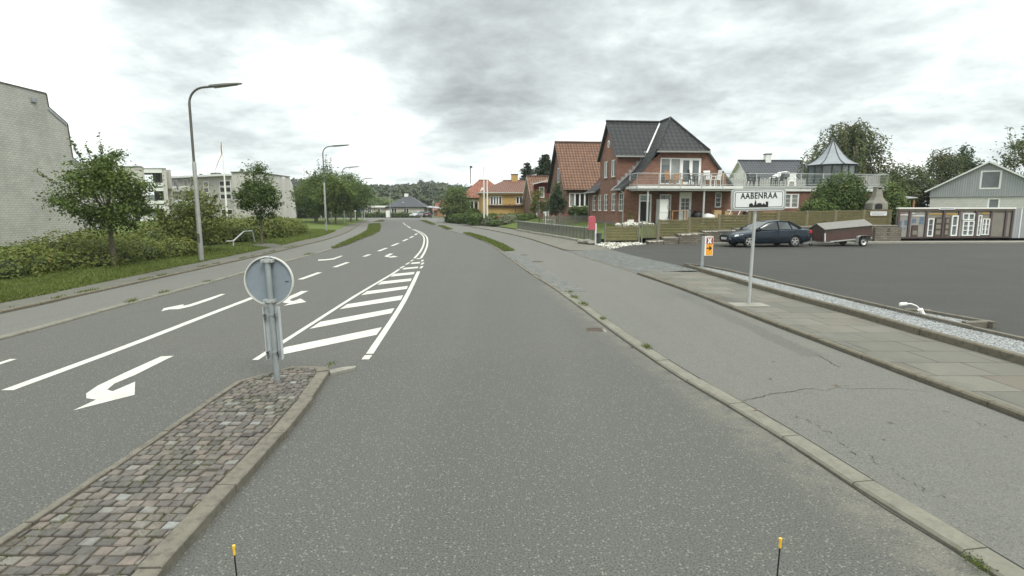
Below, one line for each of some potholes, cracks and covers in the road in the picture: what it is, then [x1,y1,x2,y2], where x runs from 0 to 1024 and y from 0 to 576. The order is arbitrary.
crack [743,385,926,401]
